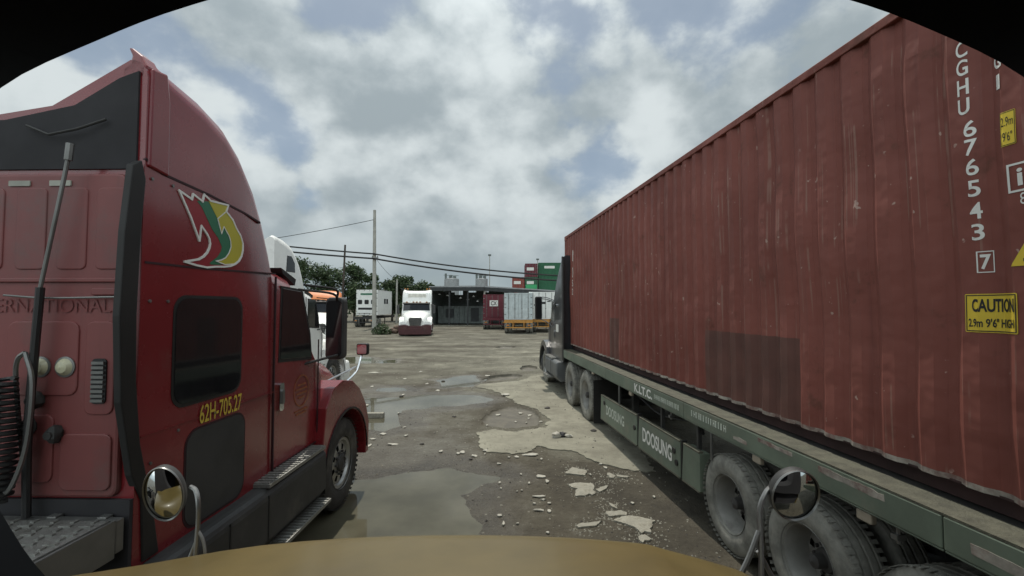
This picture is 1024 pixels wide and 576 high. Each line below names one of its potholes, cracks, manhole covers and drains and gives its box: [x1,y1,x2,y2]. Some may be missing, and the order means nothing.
pothole [480,406,540,428]
